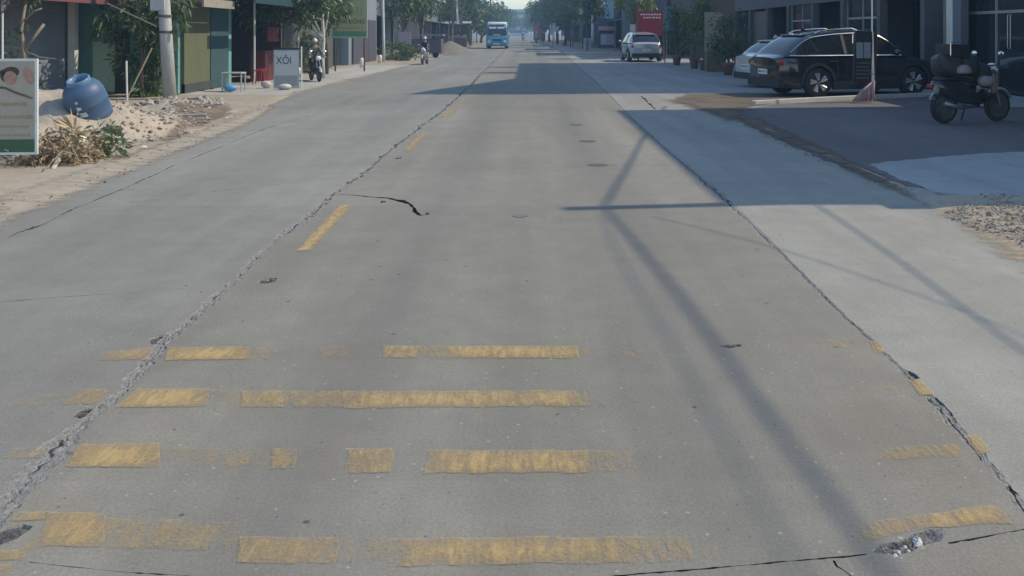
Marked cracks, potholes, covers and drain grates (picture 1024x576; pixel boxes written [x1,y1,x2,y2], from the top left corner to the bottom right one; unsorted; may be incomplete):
crack [948,529,1024,544]
crack [341,194,423,216]
pothole [871,528,946,555]
crack [7,116,323,238]
crack [30,562,188,576]
crack [613,554,867,576]
